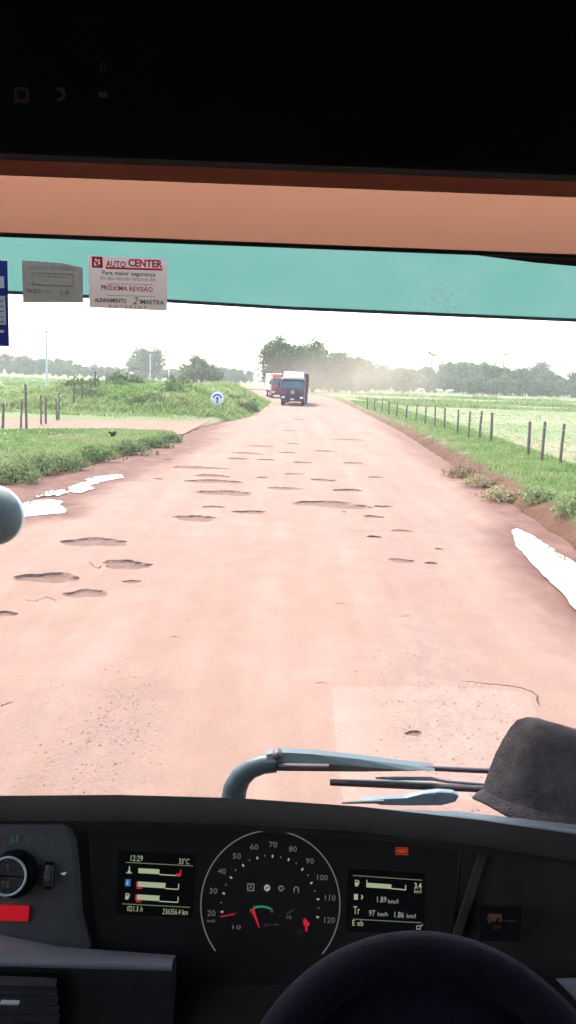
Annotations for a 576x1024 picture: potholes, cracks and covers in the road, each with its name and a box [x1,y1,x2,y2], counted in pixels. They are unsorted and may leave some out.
pothole [13,572,80,583]
pothole [62,589,108,598]
pothole [102,559,154,570]
crack [465,681,541,707]
pothole [292,501,373,509]
pothole [59,537,127,546]
